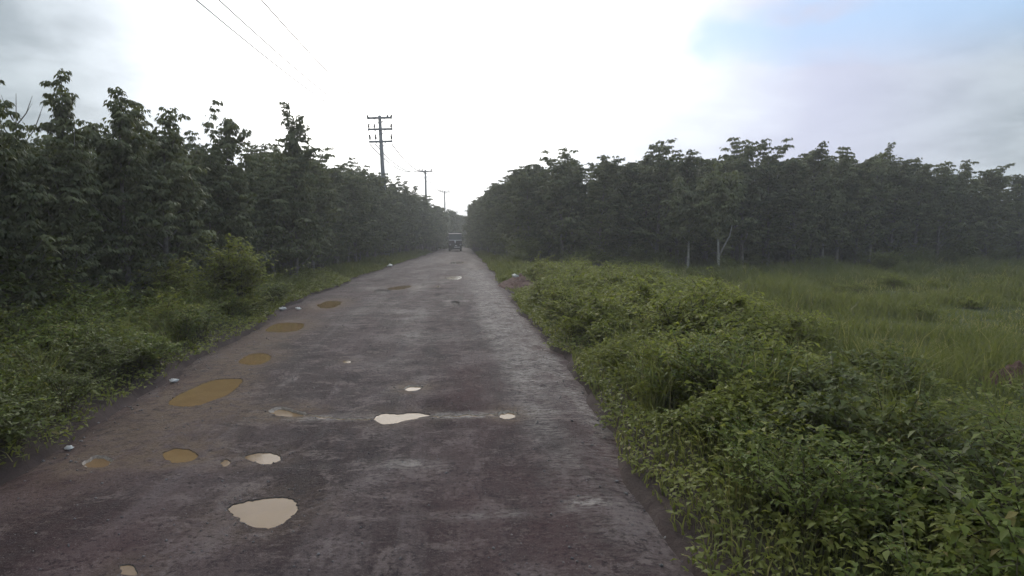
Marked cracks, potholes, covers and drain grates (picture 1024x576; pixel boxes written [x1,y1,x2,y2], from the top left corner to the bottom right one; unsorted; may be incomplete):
pothole [119,564,138,576]
pothole [269,407,307,417]
pothole [498,410,517,419]
pothole [243,452,281,464]
pothole [237,353,272,365]
pothole [265,323,305,332]
pothole [373,412,431,424]
pothole [162,448,199,463]
pothole [317,300,341,309]
pothole [227,496,300,529]
pothole [168,378,243,407]
pothole [82,455,114,468]
